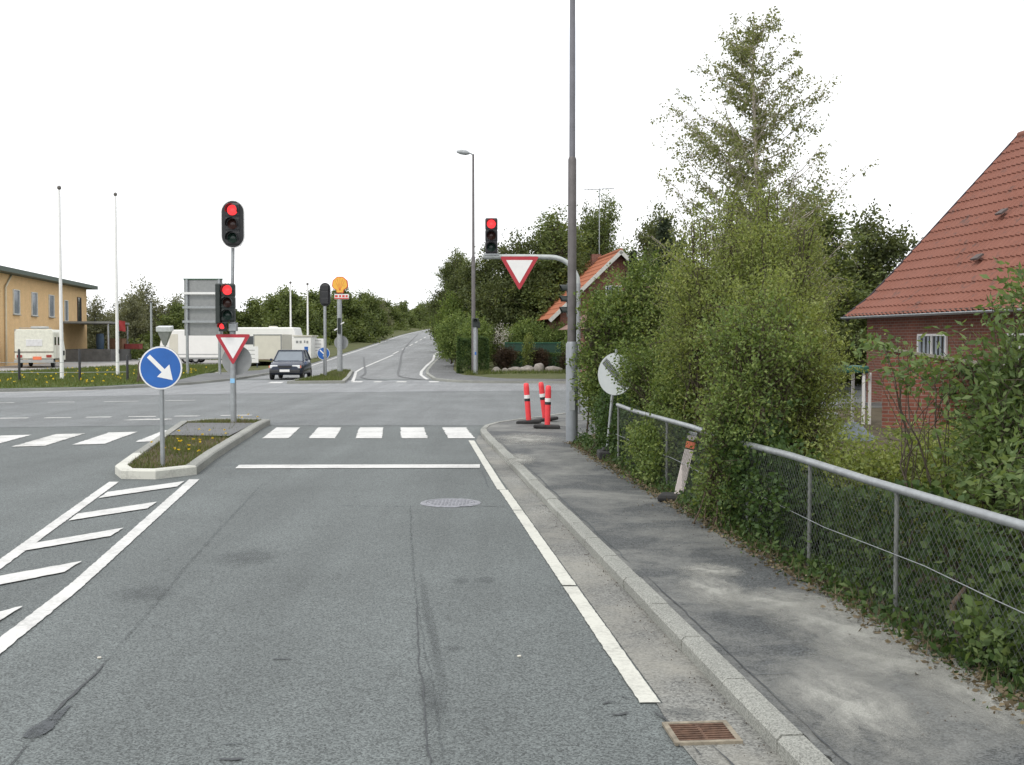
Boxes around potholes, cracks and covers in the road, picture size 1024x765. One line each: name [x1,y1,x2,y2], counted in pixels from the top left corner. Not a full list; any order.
manhole cover [420,498,481,507]
crack [49,662,105,717]
crack [414,574,432,765]
drain grate [662,720,743,746]
